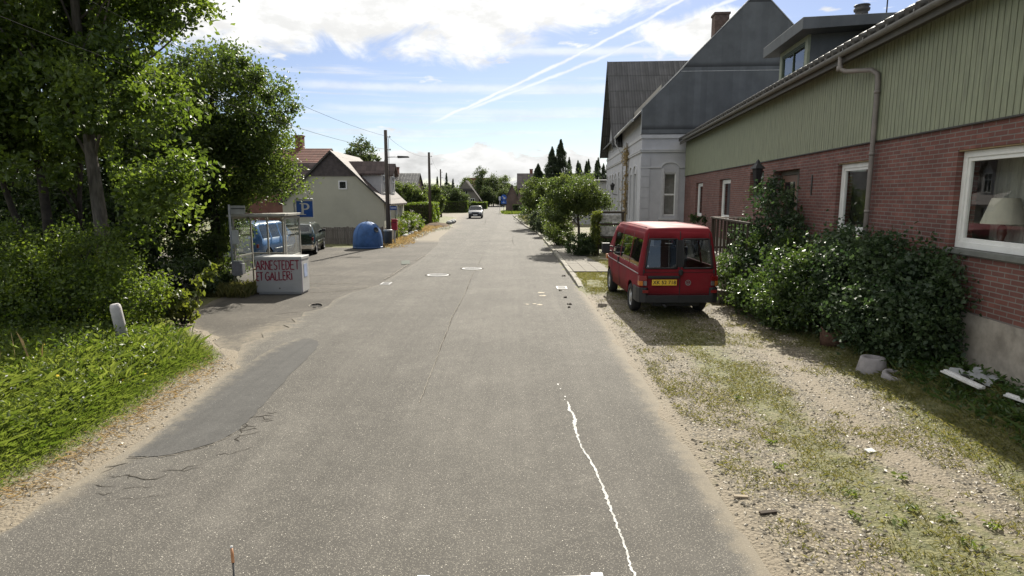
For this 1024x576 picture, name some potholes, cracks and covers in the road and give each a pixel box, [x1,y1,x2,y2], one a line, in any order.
crack [94,412,276,501]
